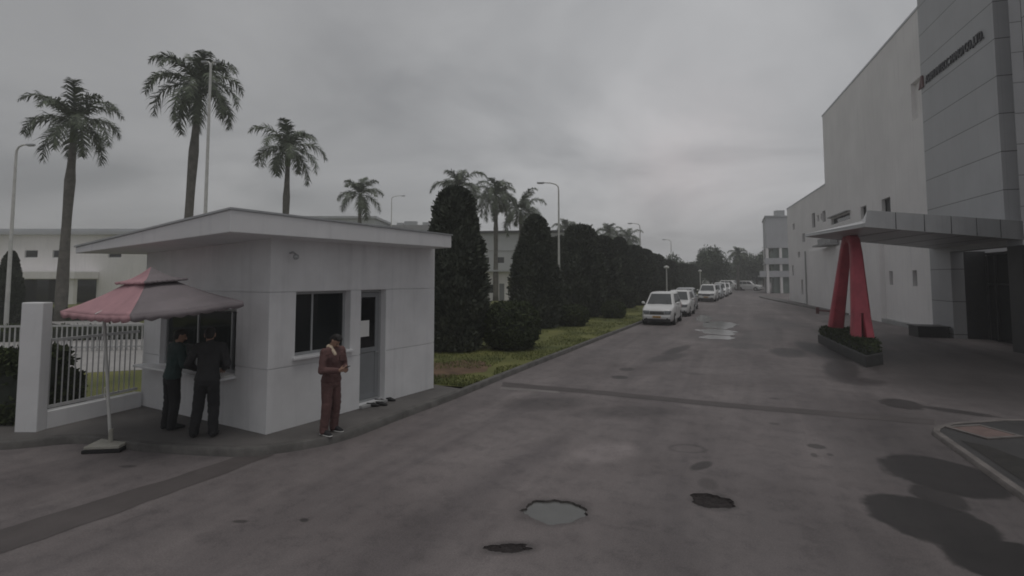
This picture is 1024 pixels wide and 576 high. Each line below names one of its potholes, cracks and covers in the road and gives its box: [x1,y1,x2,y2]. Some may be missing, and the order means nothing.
pothole [690,493,736,509]
pothole [519,499,588,525]
pothole [483,543,533,553]
